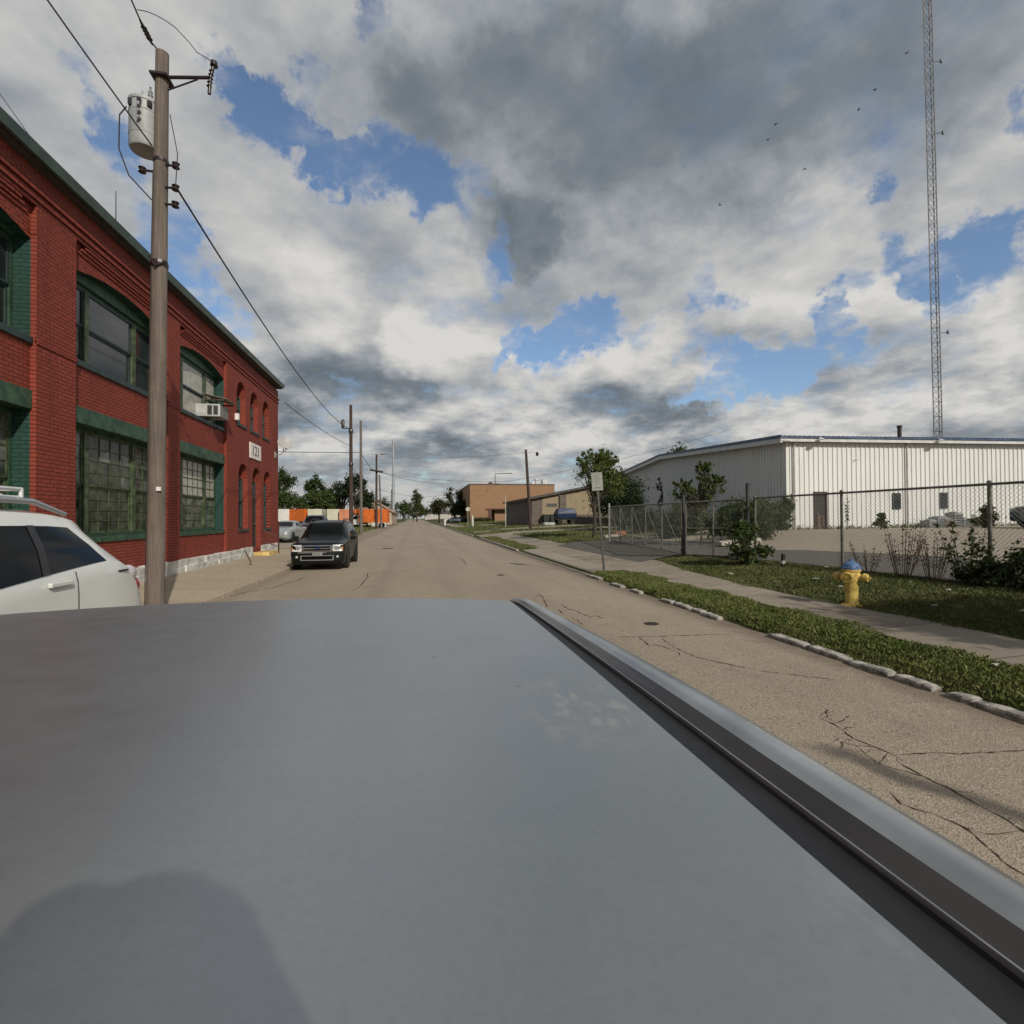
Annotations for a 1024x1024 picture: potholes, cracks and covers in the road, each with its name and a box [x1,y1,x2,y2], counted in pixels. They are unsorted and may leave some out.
crack [821,706,1024,874]
crack [639,634,827,679]
